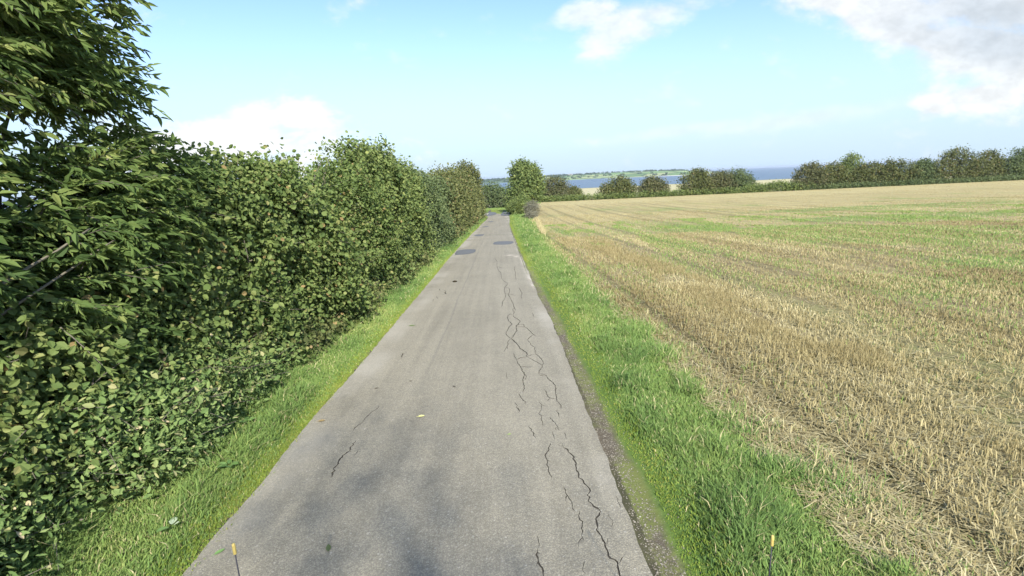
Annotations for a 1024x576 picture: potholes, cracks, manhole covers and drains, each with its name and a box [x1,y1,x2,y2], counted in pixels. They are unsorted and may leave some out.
crack [331,410,375,476]
crack [497,267,623,576]
